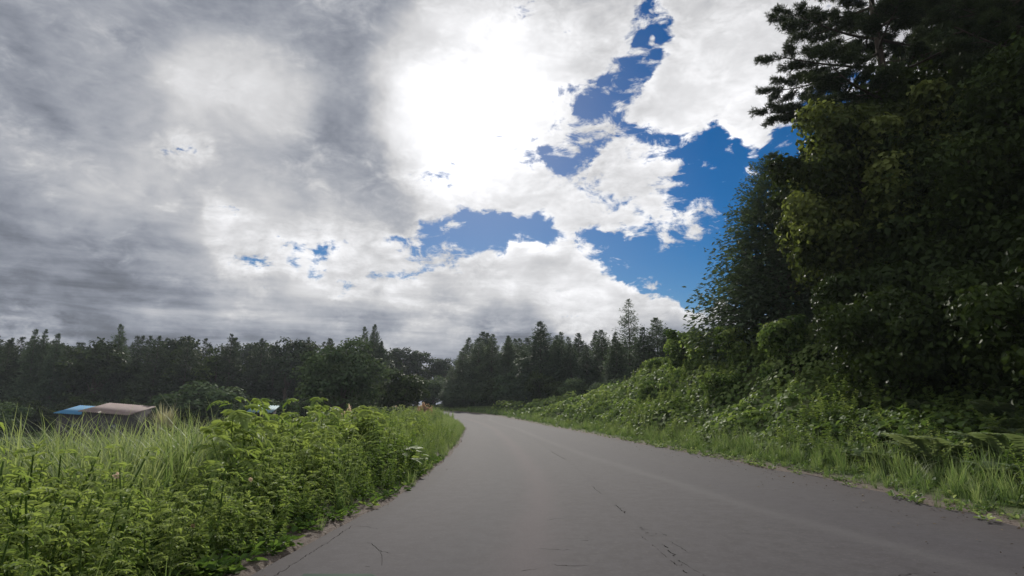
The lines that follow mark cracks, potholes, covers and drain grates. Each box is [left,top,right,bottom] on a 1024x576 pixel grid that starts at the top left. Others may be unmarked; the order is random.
crack [615,505,704,575]
crack [277,524,388,575]
